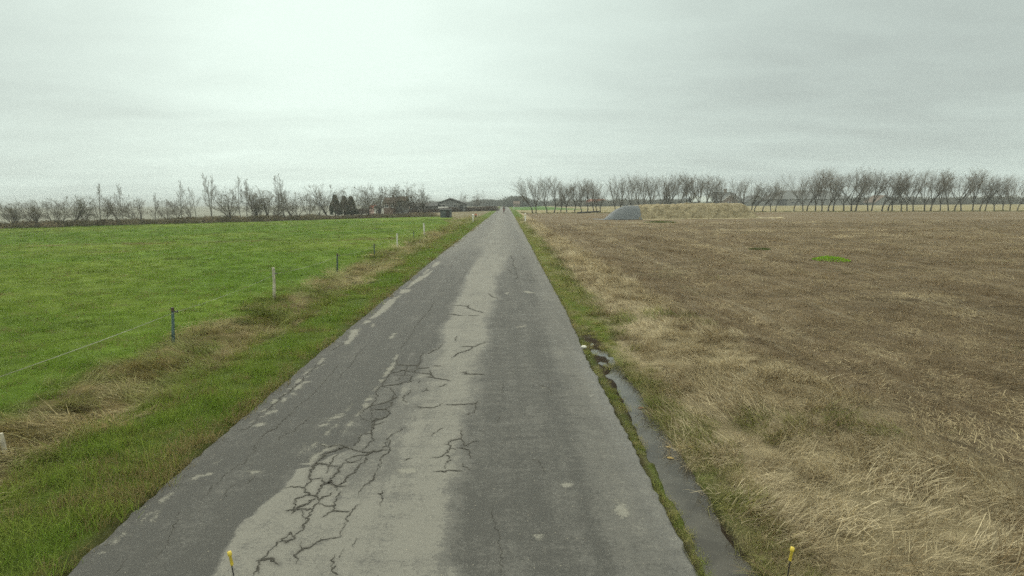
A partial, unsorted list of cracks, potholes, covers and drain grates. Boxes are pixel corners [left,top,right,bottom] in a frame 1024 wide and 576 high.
crack [253,352,450,575]
crack [402,303,485,414]
crack [431,428,474,472]
crack [202,345,365,500]
